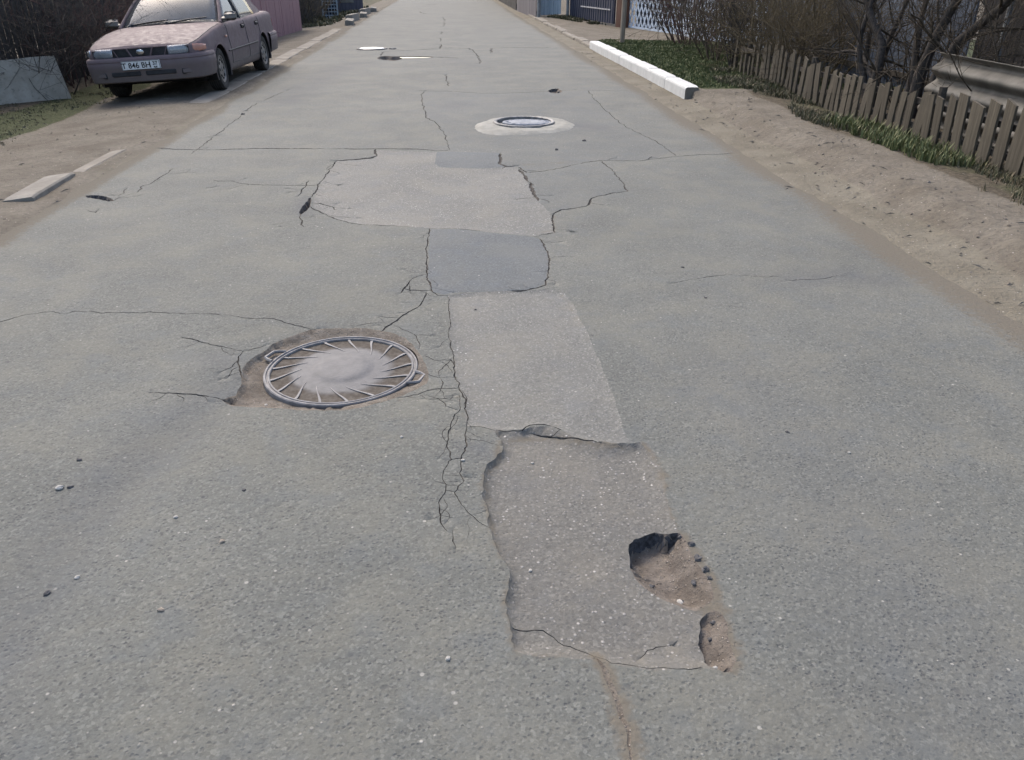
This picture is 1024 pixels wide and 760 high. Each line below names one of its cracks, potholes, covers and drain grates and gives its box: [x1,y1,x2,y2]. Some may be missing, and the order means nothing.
manhole cover [475,116,575,135]
crack [0,307,310,329]
pothole [628,533,714,611]
crack [513,628,701,760]
manhole cover [263,336,425,409]
crack [89,169,191,213]
pothole [698,610,736,672]
crack [419,18,493,64]
crack [444,75,732,292]
crack [161,90,600,547]
